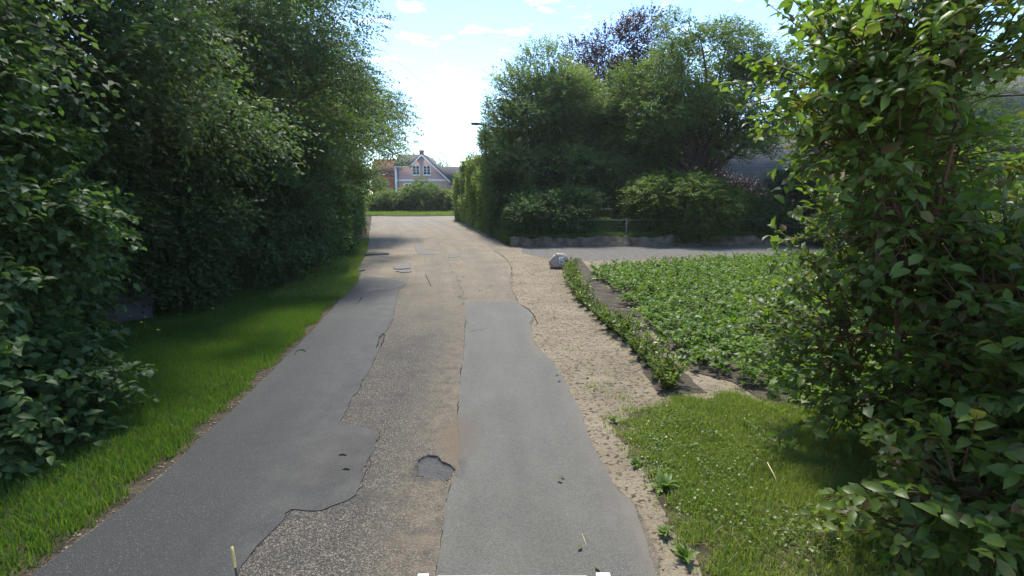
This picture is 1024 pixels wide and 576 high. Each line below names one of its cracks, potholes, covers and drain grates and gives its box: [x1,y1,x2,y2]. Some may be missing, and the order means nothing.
pothole [415,454,455,482]
crack [262,286,402,543]
